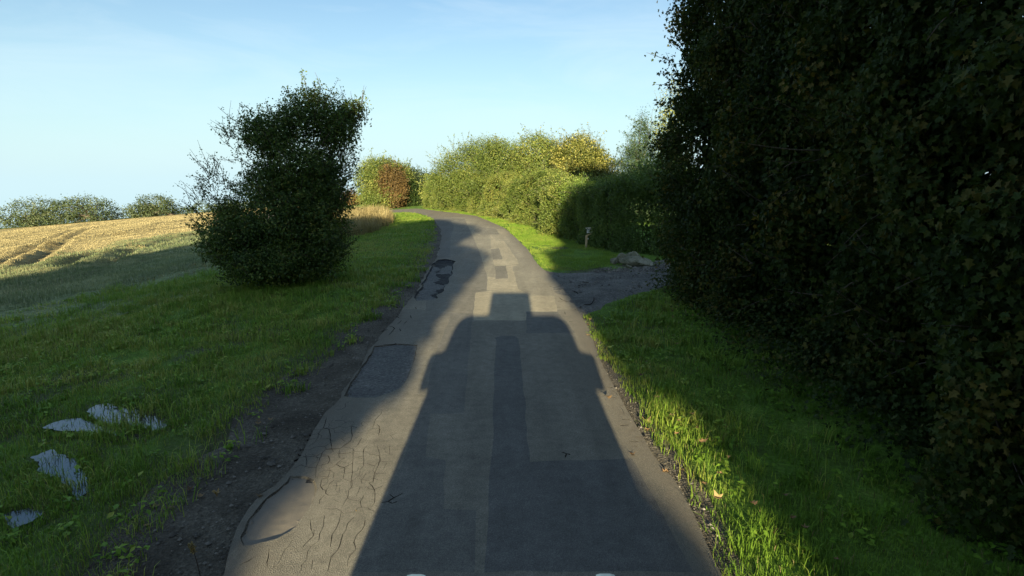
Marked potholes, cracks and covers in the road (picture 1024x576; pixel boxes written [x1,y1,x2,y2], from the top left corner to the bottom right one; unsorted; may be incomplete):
crack [238,402,402,569]
pothole [414,259,456,301]
pothole [240,476,317,545]
